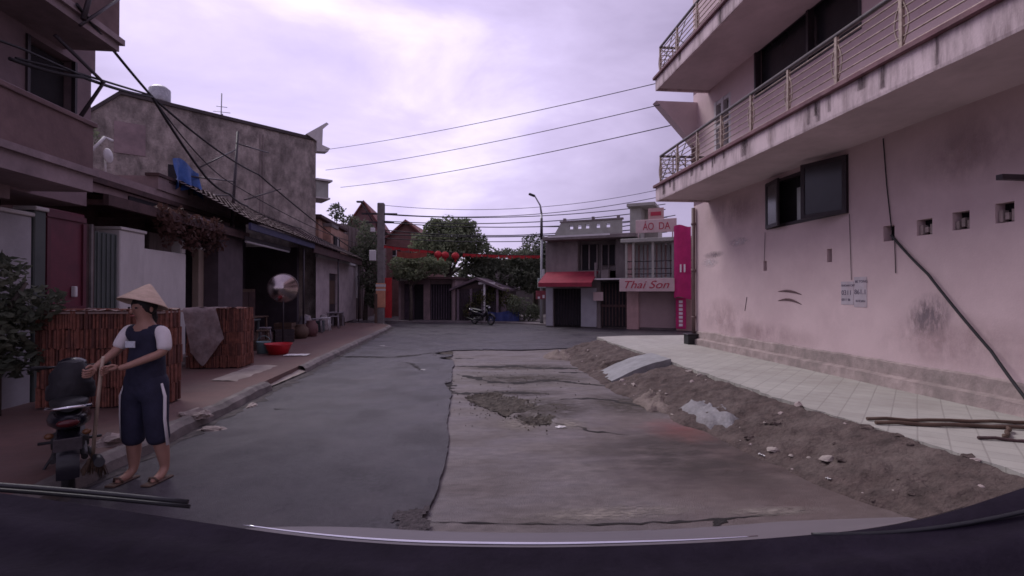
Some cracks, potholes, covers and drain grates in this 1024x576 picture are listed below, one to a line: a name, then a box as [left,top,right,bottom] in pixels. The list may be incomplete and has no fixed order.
crack [556,423,625,435]
pothole [391,506,431,531]
pothole [466,392,539,417]
crack [459,510,805,525]
pothole [513,414,556,426]
crack [337,353,429,370]
